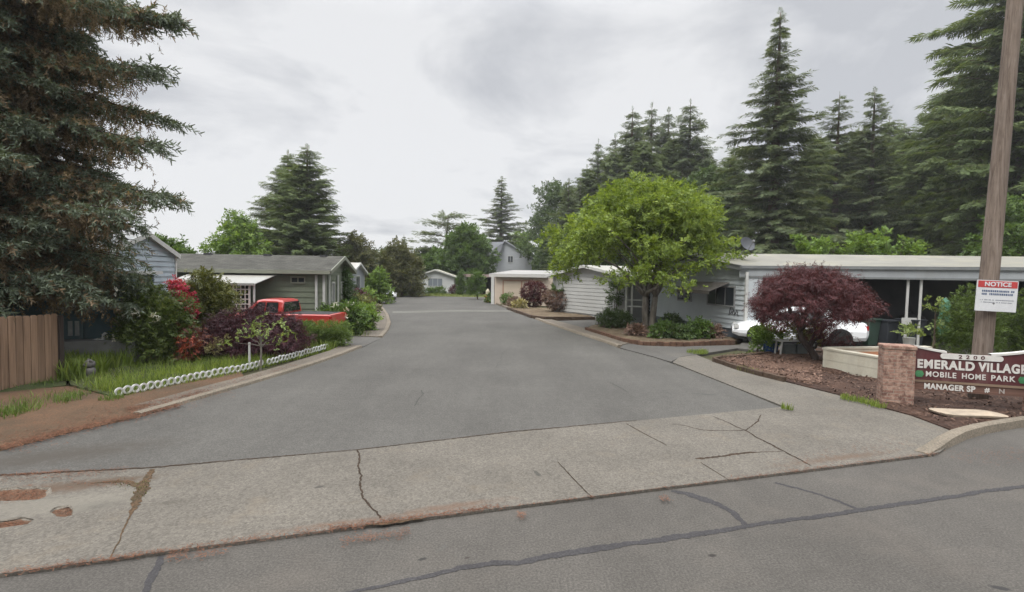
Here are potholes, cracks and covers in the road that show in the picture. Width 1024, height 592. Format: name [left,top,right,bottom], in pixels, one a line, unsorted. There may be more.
crack [627,415,810,480]
pothole [0,517,34,528]
crack [91,469,155,561]
pothole [50,505,73,517]
pothole [0,486,52,501]
crack [357,450,381,518]
